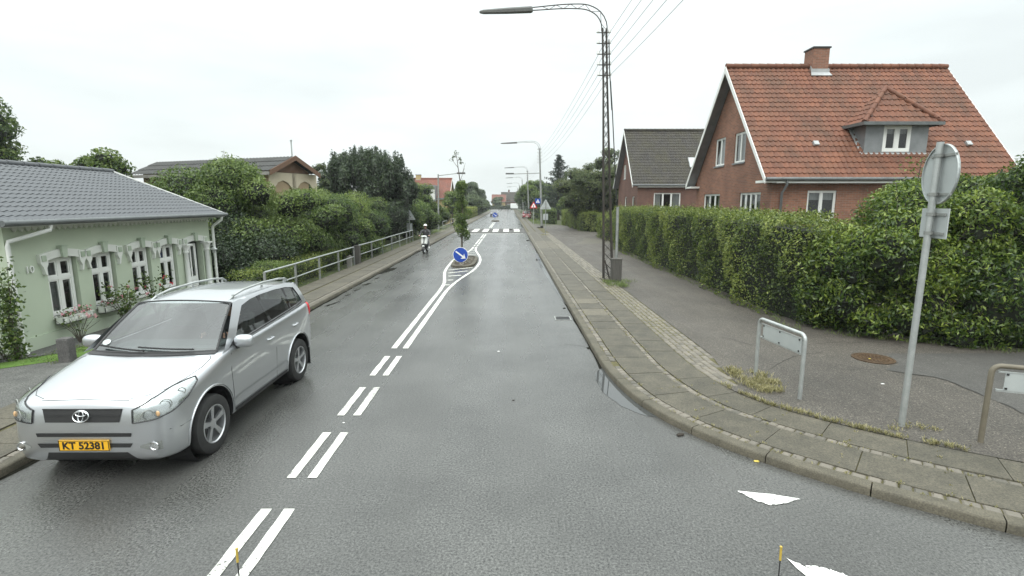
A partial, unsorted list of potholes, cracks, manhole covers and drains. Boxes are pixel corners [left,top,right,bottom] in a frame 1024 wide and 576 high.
manhole cover [851,353,896,364]
